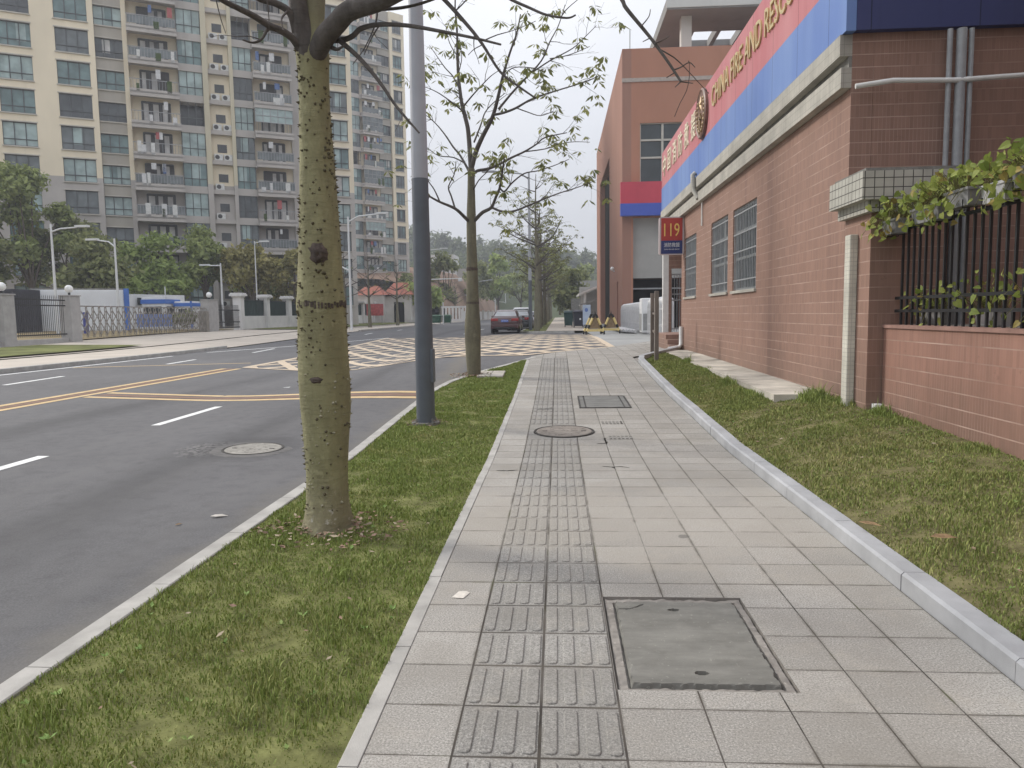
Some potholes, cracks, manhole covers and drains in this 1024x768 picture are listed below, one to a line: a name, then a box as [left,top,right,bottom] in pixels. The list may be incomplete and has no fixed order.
manhole cover [534,425,595,438]
utility cover [602,597,801,732]
manhole cover [209,442,293,457]
utility cover [577,396,632,408]
